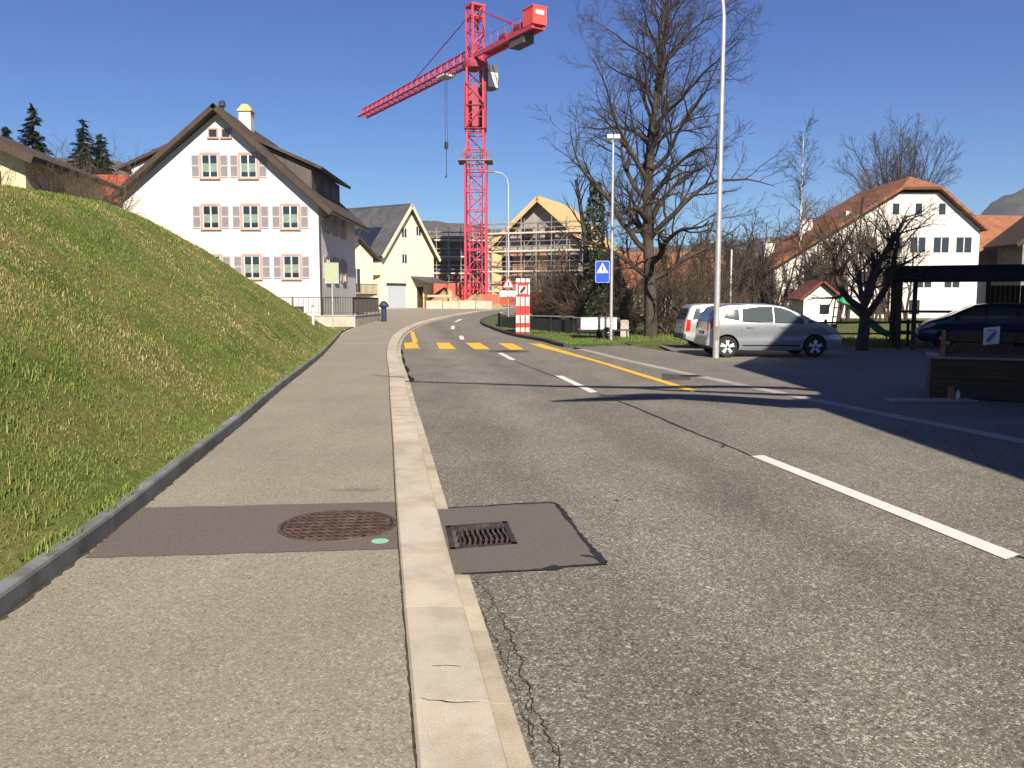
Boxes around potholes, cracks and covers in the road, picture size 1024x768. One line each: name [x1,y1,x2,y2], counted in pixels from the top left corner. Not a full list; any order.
crack [474,577,563,768]
manhole cover [277,510,397,542]
